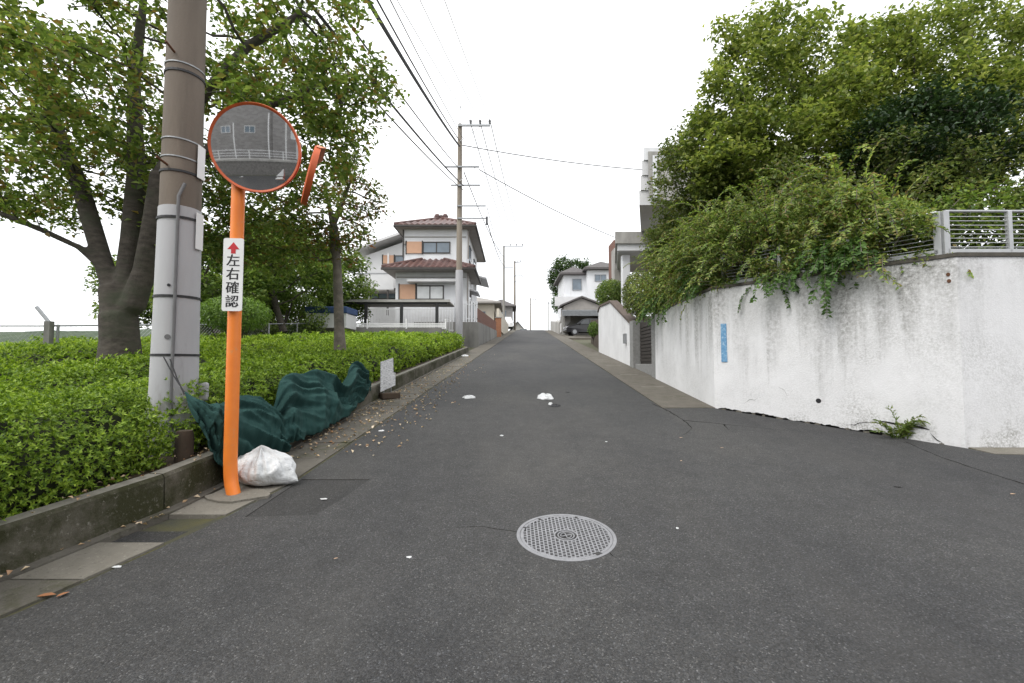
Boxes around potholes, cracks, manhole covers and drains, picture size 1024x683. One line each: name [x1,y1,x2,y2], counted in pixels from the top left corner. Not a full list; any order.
manhole cover [517,514,617,561]
crack [906,442,1024,484]
crack [654,404,778,433]
